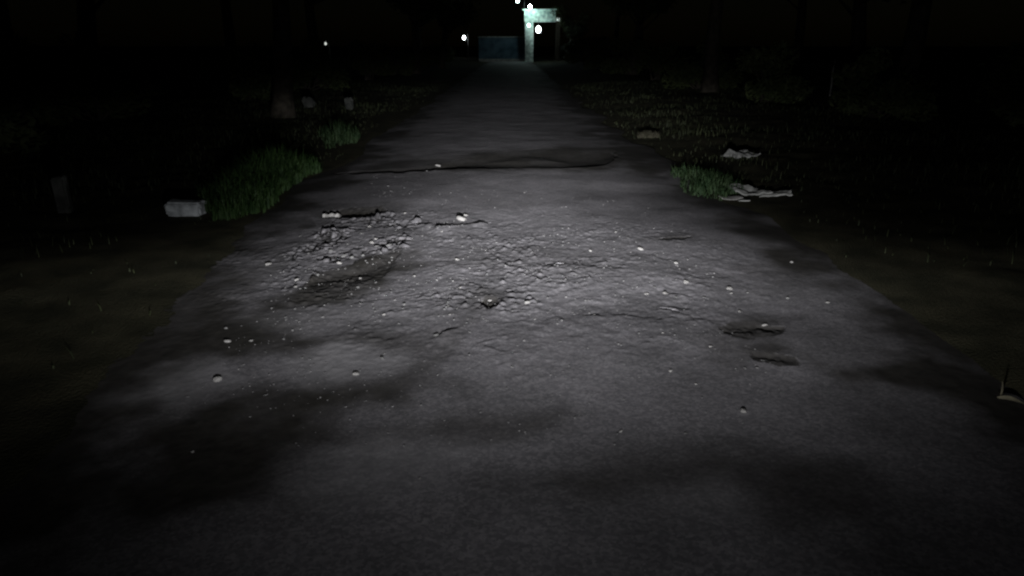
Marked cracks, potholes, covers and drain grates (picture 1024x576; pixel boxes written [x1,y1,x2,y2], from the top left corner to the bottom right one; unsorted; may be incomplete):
pothole [748,351,802,368]
pothole [715,321,787,341]
pothole [477,294,502,310]
crack [658,307,699,318]
pothole [299,248,404,301]
